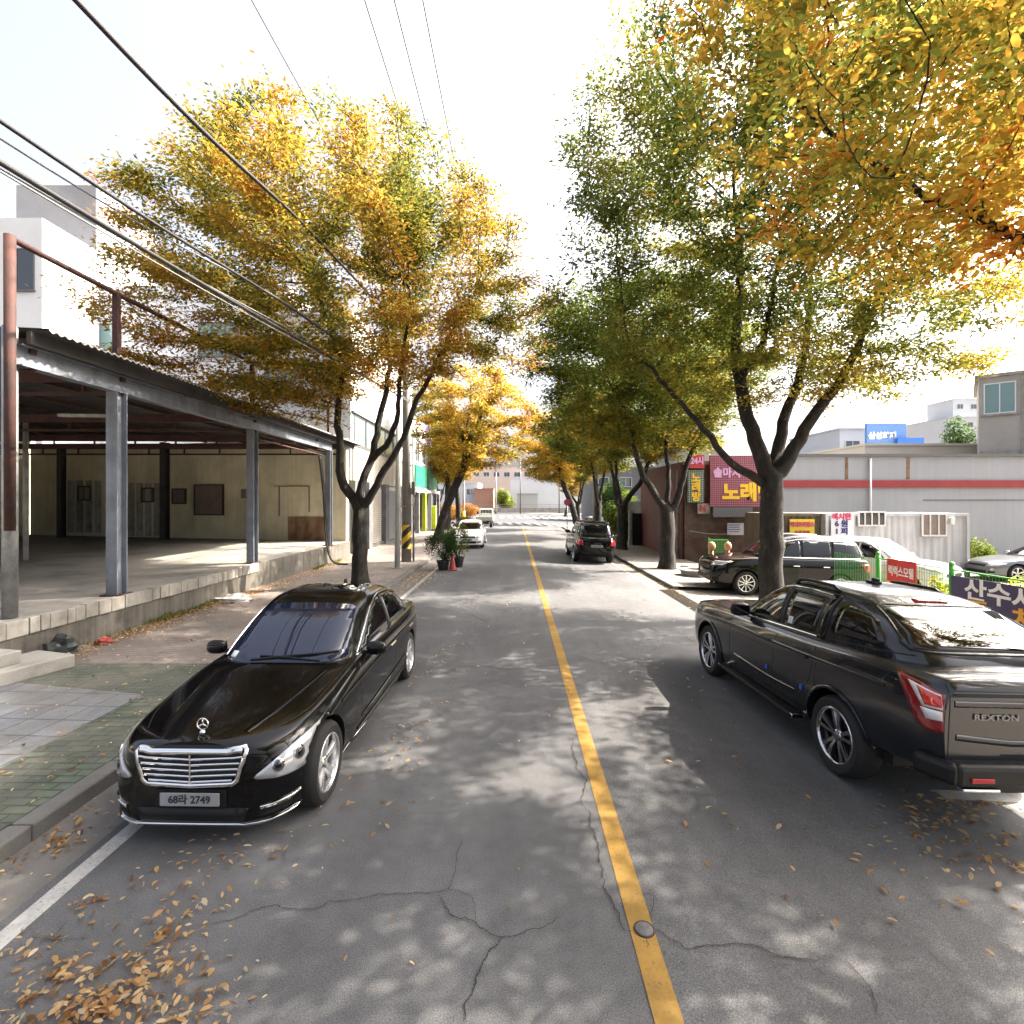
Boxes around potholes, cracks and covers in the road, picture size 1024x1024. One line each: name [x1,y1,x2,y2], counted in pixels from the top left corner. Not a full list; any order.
crack [195,841,558,1022]
crack [847,961,881,1020]
crack [571,738,826,961]
